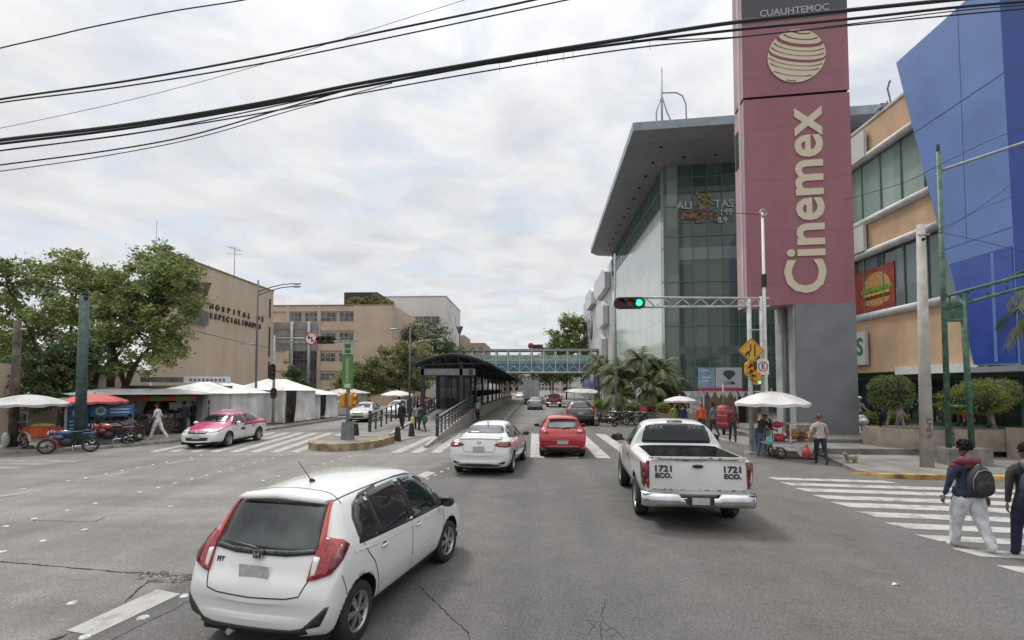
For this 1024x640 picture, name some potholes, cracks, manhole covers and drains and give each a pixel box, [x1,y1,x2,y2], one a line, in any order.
crack [0,561,193,602]
crack [418,585,470,640]
crack [586,600,625,640]
